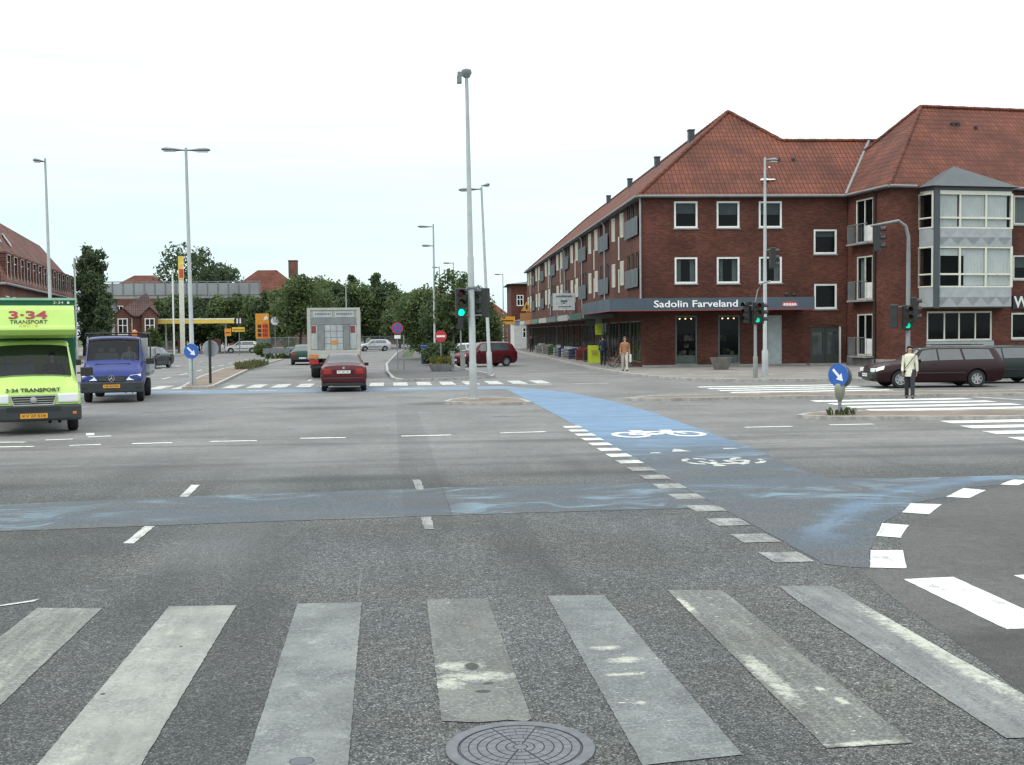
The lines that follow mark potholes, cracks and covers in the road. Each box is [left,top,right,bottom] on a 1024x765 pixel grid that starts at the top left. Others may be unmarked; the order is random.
manhole cover [446,721,595,765]
